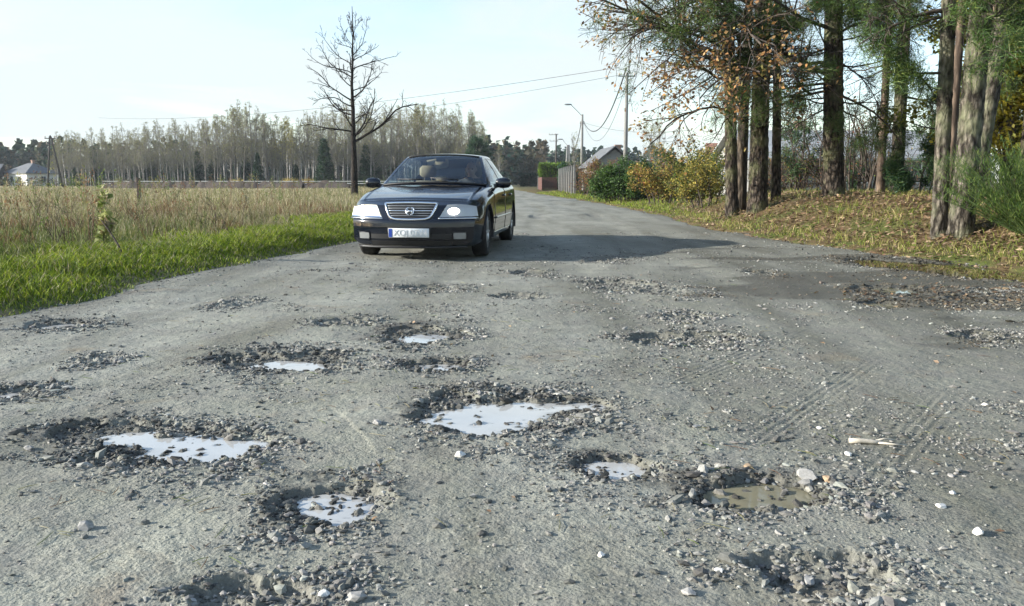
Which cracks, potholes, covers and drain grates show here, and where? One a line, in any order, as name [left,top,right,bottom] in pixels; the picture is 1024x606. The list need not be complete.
pothole [570,454,665,481]
pothole [741,549,897,602]
pothole [382,325,474,346]
pothole [849,285,1024,309]
pothole [73,353,126,363]
pothole [401,358,472,374]
pothole [626,332,750,348]
pothole [313,316,373,327]
pothole [216,350,348,374]
pothole [264,481,403,528]
pothole [685,472,829,514]
pothole [949,330,1024,344]
